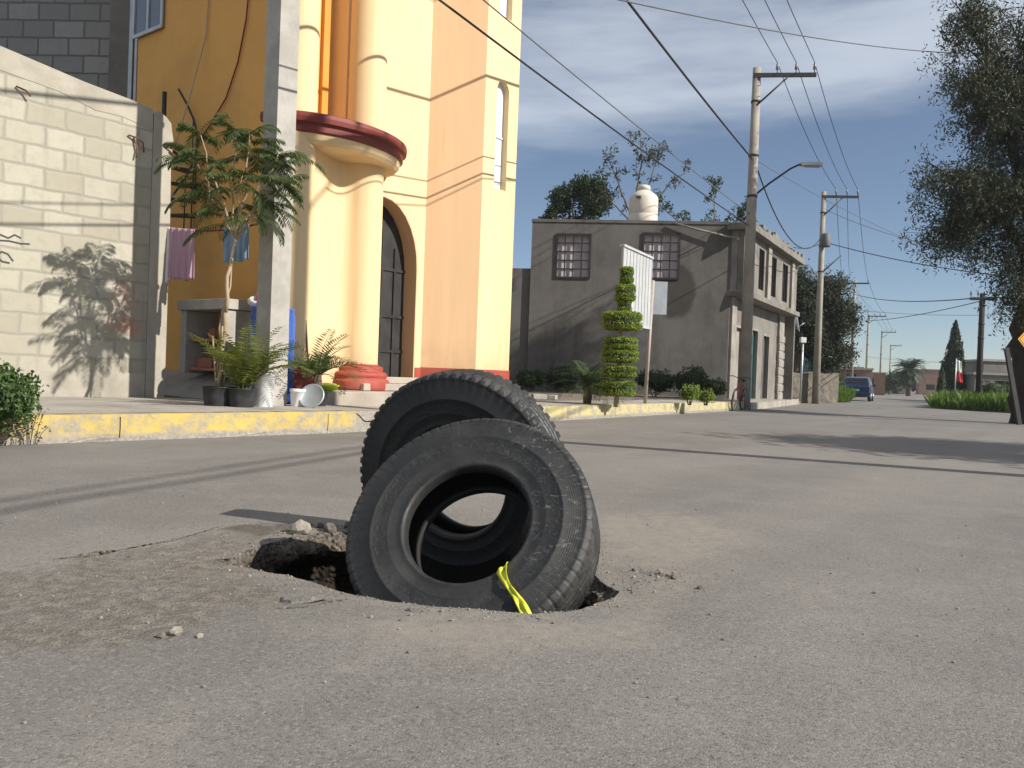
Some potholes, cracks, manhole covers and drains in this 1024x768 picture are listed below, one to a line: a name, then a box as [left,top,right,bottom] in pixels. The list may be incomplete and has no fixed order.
crack [53,527,217,560]
pothole [212,532,619,610]
